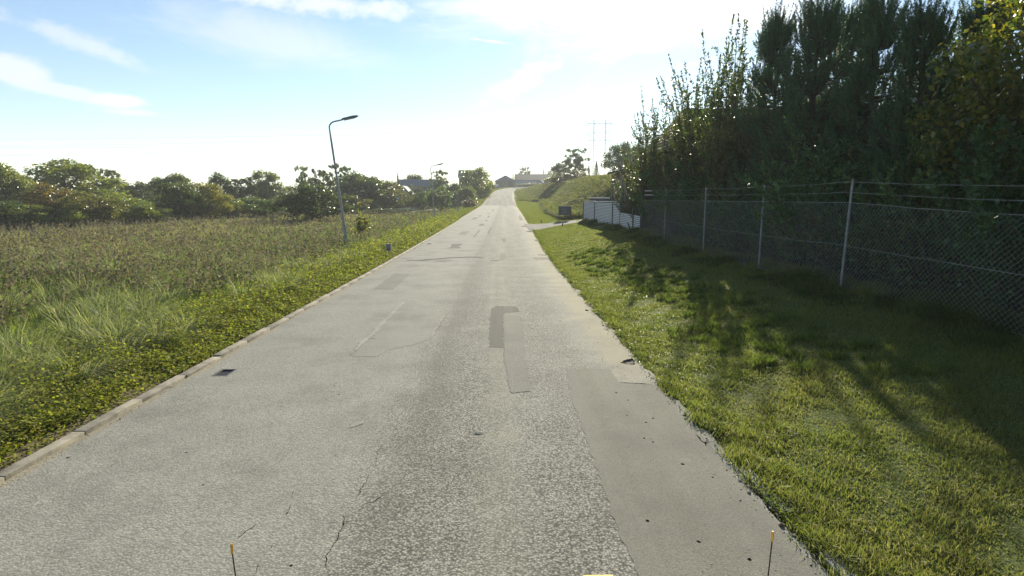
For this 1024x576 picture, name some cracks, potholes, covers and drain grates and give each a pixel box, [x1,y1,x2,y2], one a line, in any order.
crack [325,445,389,567]
